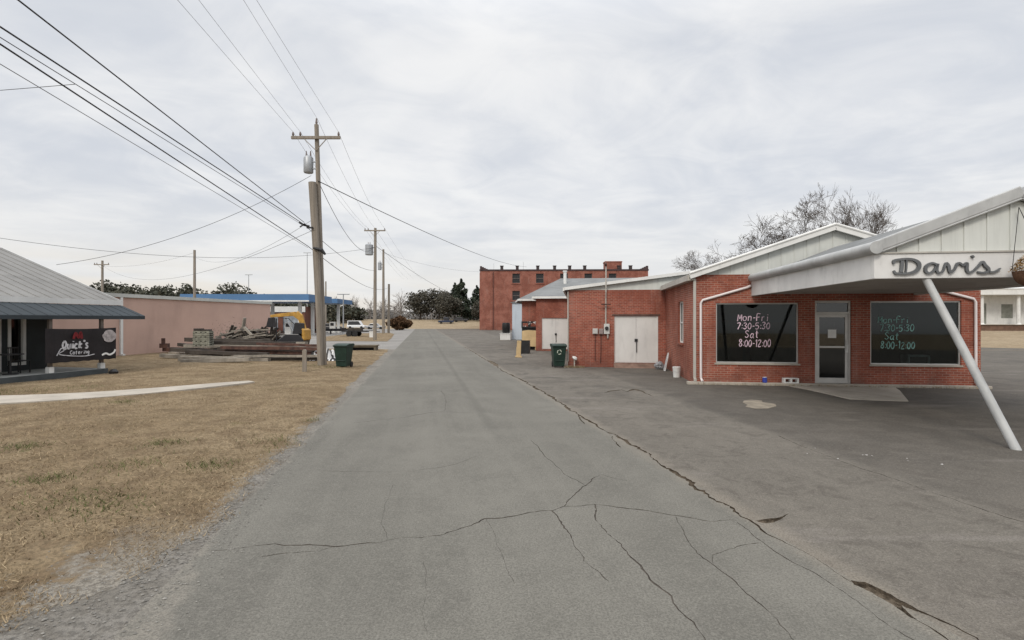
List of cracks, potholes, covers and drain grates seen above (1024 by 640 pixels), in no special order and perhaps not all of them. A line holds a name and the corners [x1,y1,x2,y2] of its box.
crack [214,442,914,640]
pothole [851,580,917,619]
